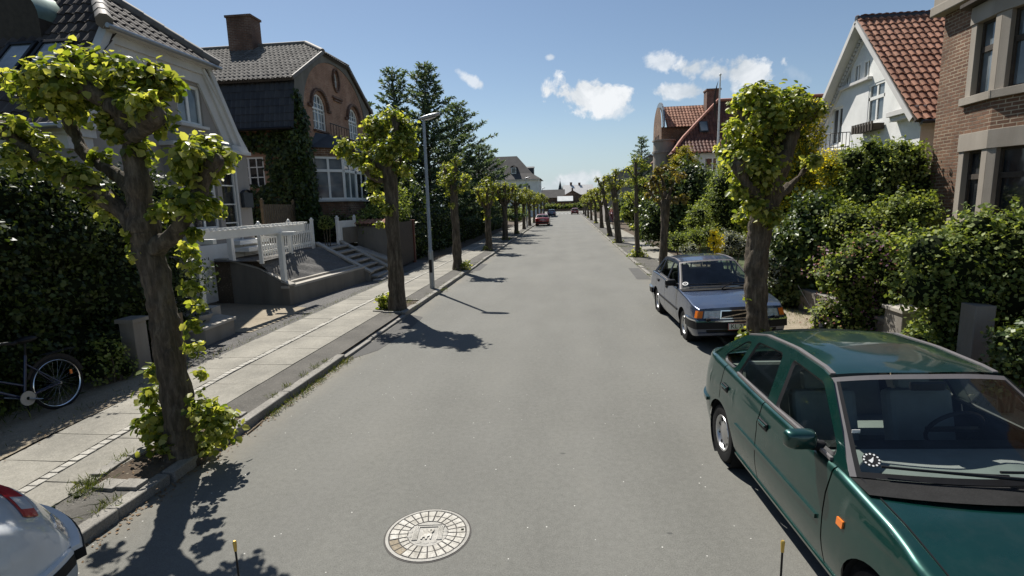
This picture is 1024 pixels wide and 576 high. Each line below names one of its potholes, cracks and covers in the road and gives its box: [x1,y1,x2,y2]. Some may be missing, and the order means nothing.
manhole cover [383,509,471,563]
